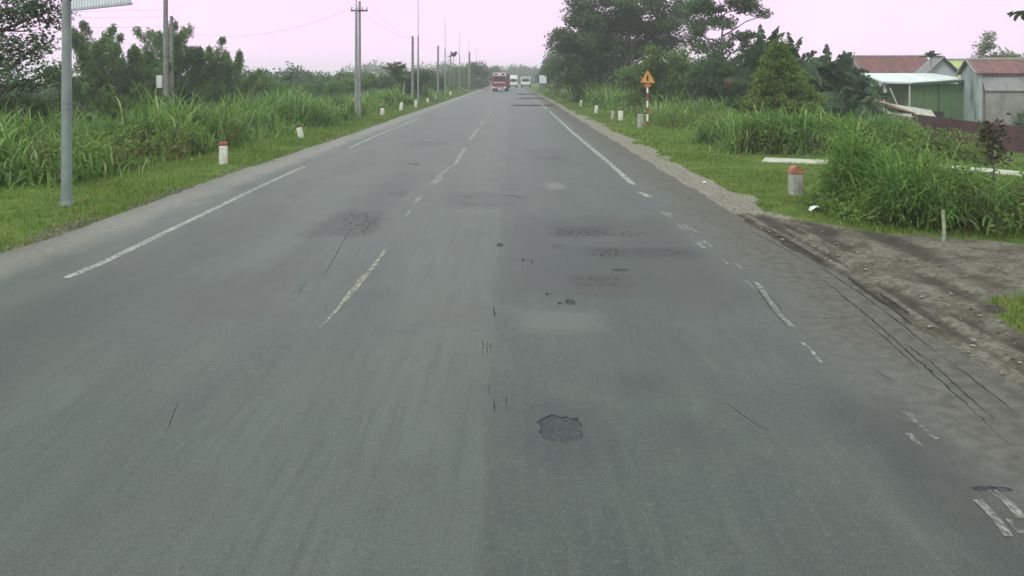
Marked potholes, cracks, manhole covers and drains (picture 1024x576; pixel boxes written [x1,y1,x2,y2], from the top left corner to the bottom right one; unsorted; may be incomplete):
crack [512,229,688,263]
pothole [536,415,584,444]
crack [751,229,1020,444]
crack [323,213,380,278]
